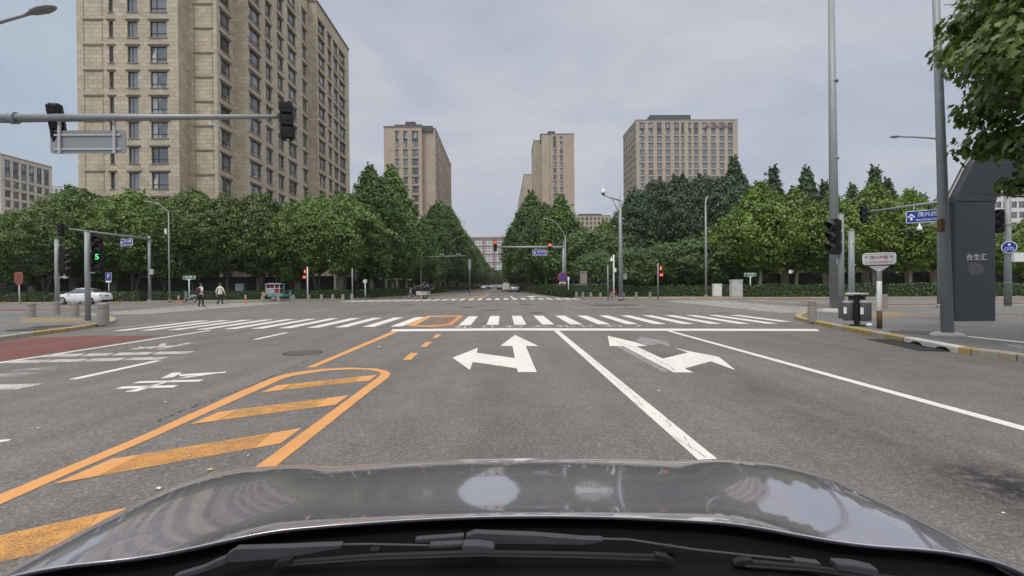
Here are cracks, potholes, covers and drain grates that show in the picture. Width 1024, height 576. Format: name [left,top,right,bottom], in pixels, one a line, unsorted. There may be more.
drain grate [868,337,967,353]
